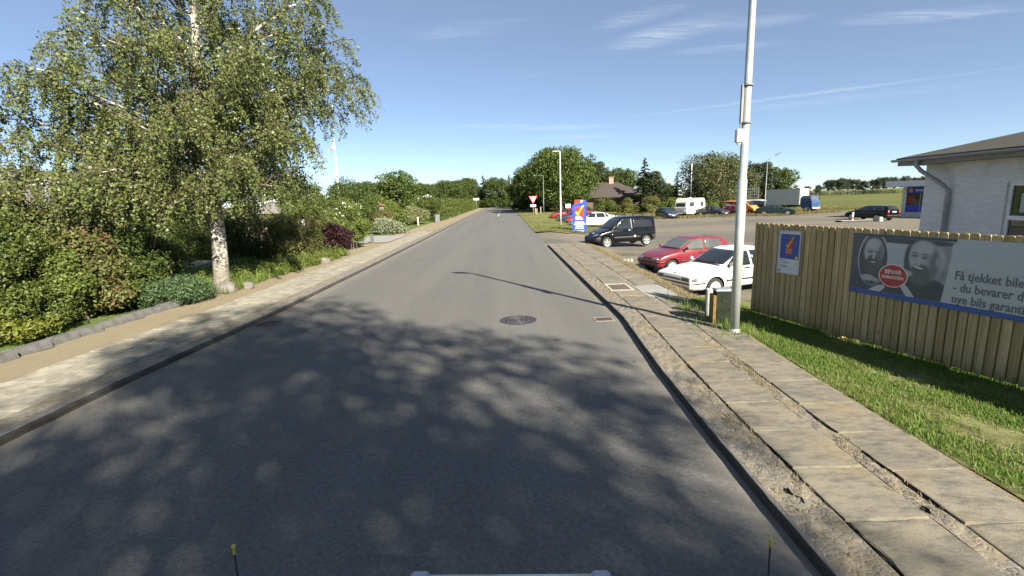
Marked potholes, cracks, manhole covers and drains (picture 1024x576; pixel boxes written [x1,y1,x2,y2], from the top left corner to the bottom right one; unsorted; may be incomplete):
manhole cover [500,315,536,325]
